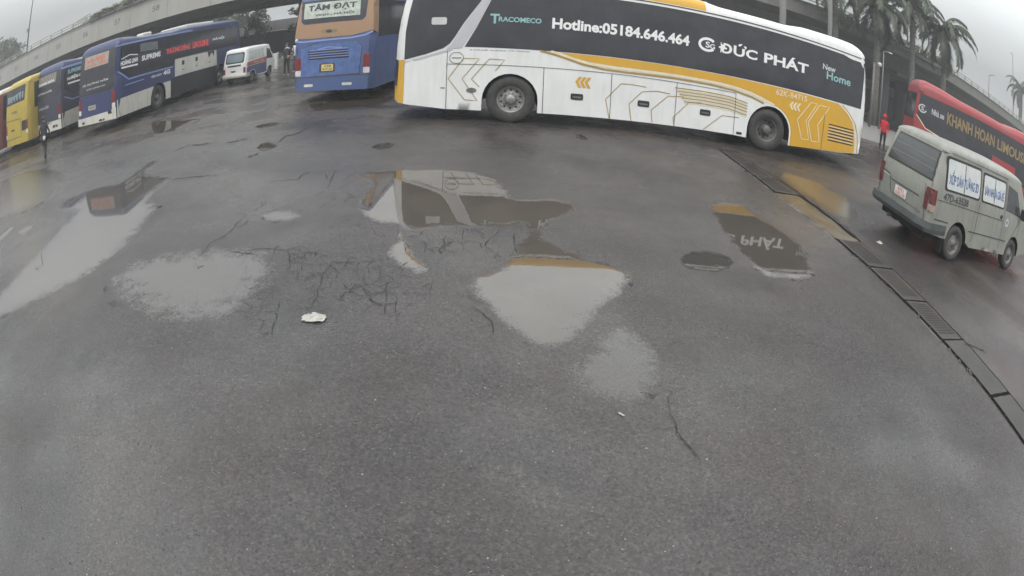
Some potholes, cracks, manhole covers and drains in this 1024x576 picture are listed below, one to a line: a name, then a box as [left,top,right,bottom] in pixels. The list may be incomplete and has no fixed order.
crack [655,382,701,463]
crack [197,202,434,315]
pothole [257,142,277,150]
pothole [371,142,395,150]
crack [236,298,280,333]
pothole [680,251,734,272]
